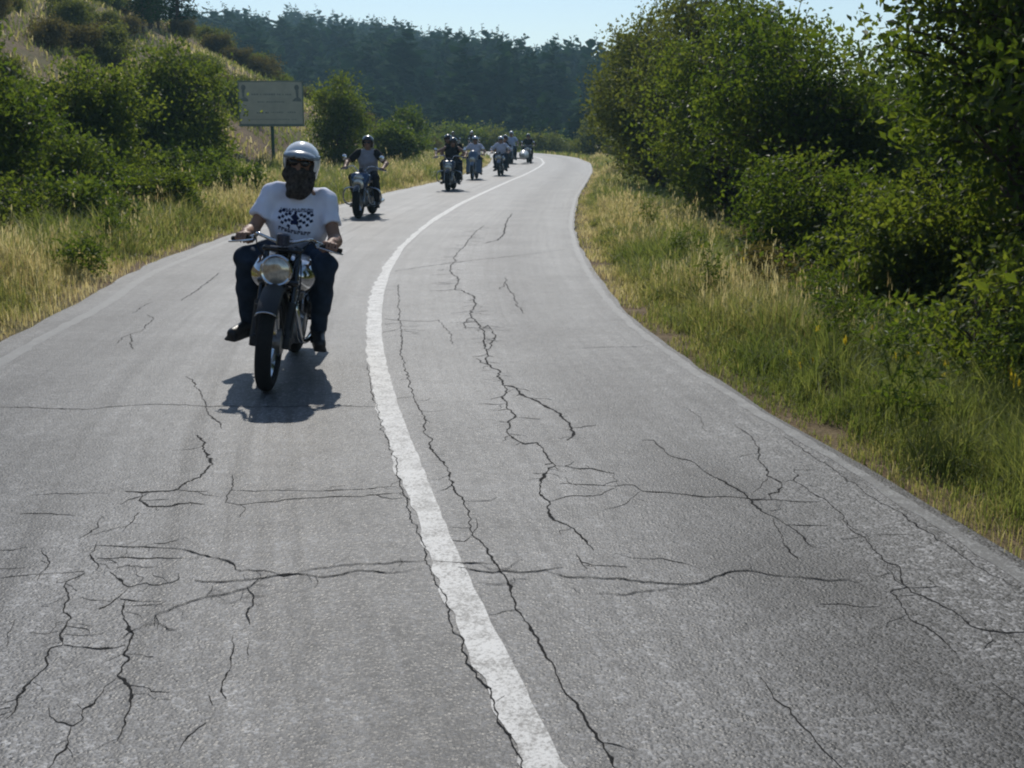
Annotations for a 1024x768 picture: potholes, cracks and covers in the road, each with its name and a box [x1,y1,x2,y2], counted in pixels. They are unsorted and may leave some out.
crack [0,225,863,768]
crack [607,429,1024,654]
